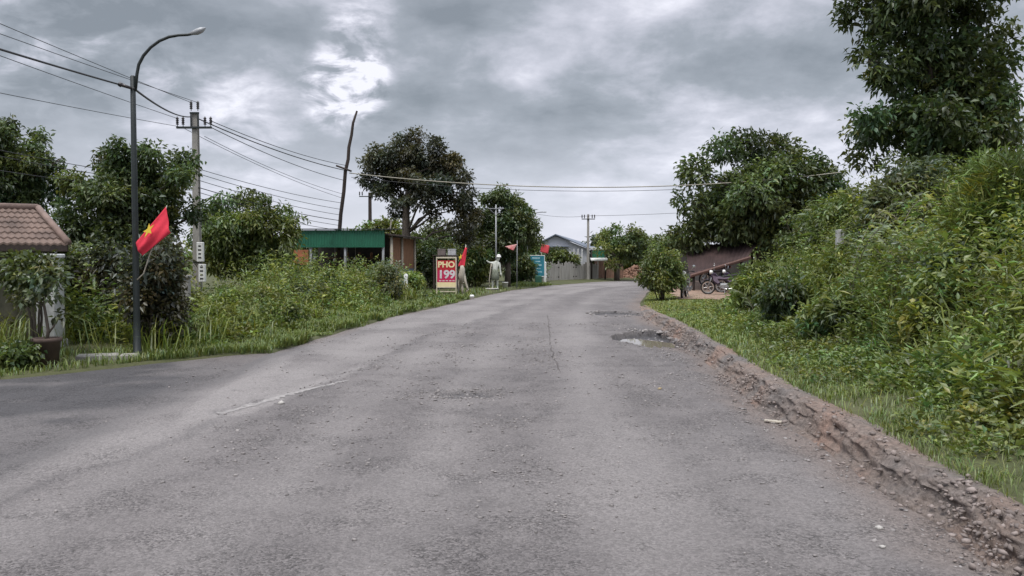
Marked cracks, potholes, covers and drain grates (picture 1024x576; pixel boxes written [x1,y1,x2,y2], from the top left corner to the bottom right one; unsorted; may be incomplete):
pothole [611,328,685,350]
crack [547,314,561,372]
